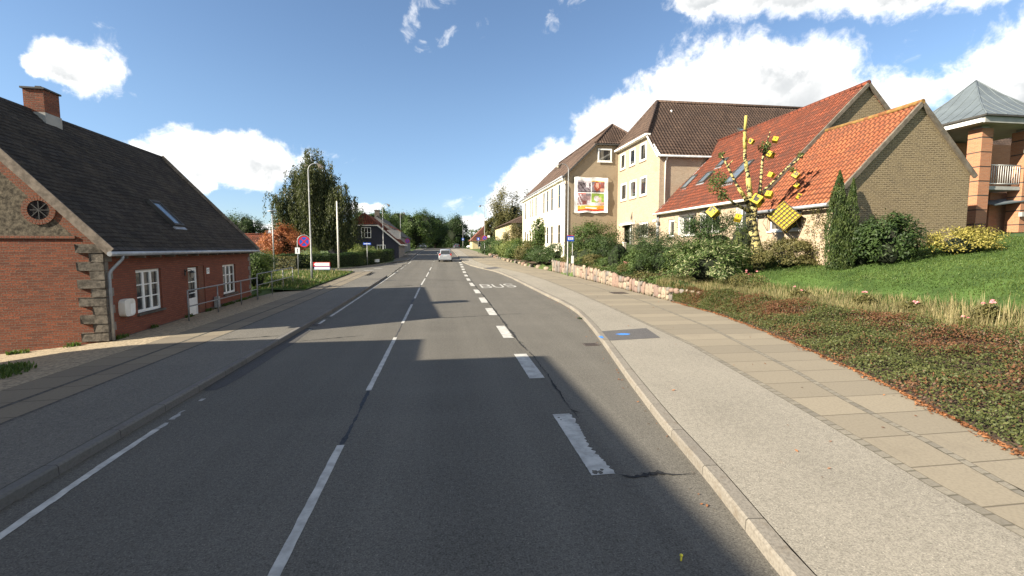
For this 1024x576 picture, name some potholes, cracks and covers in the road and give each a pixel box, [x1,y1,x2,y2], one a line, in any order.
crack [620,470,695,478]
